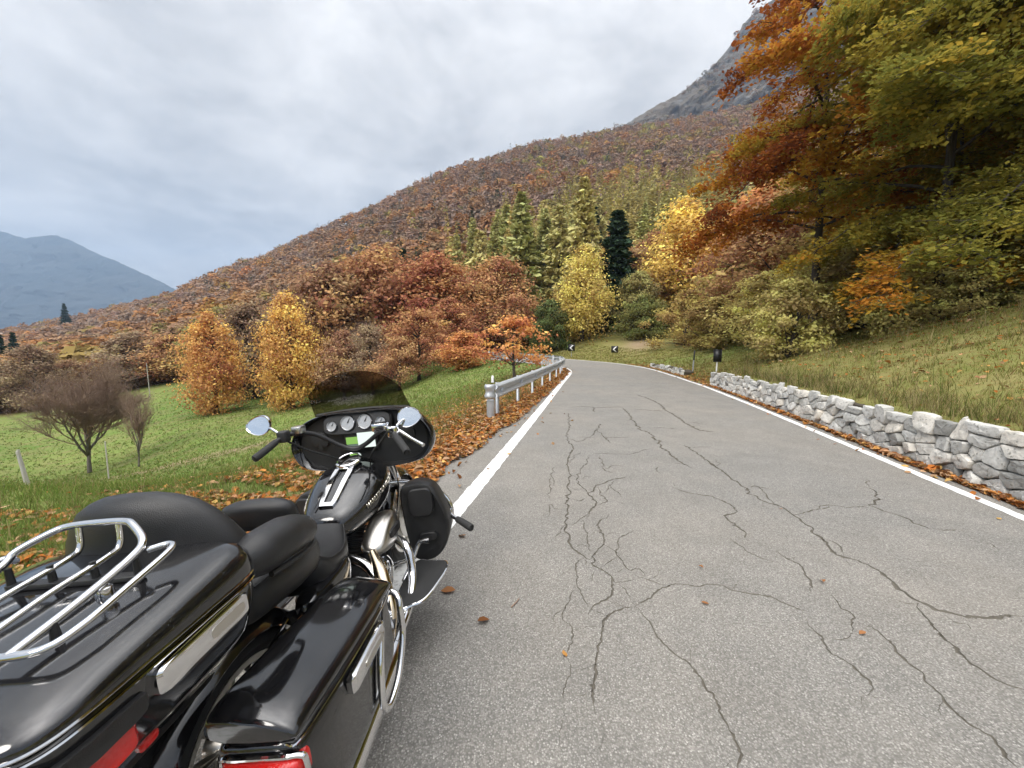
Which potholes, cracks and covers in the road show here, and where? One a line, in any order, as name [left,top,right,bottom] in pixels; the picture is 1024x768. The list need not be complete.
crack [547,395,1024,768]
